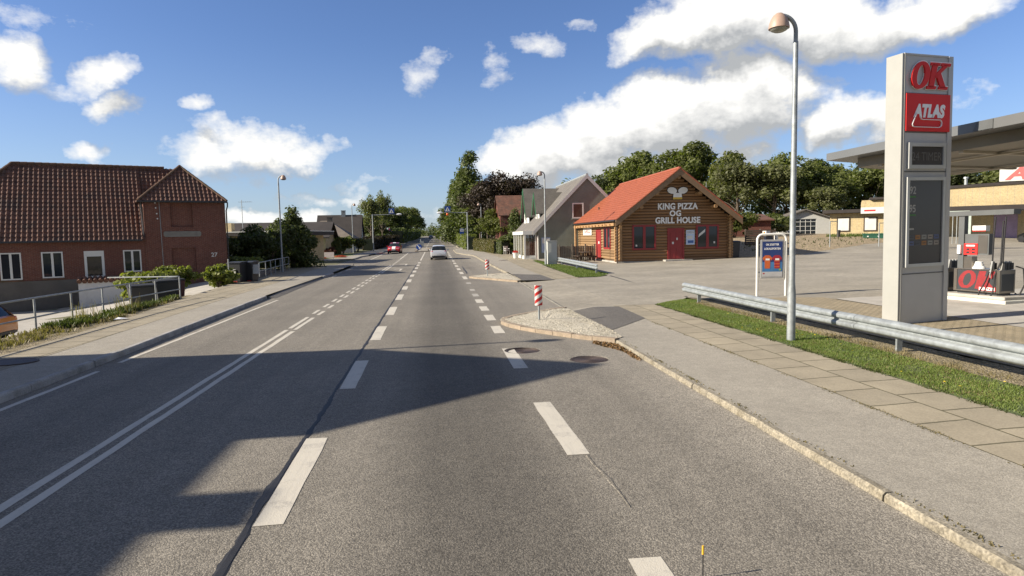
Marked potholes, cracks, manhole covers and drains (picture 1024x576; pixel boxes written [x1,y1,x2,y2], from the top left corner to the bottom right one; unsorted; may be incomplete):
crack [586,455,631,507]
